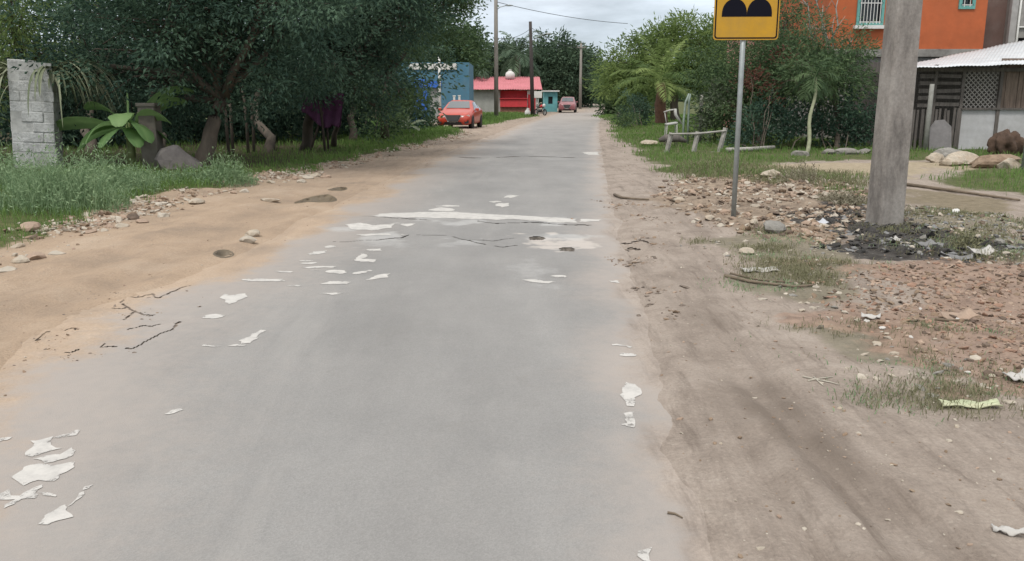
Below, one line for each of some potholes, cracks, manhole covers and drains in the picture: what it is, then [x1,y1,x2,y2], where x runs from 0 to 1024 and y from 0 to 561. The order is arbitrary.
crack [333,217,589,248]
crack [35,285,191,353]
